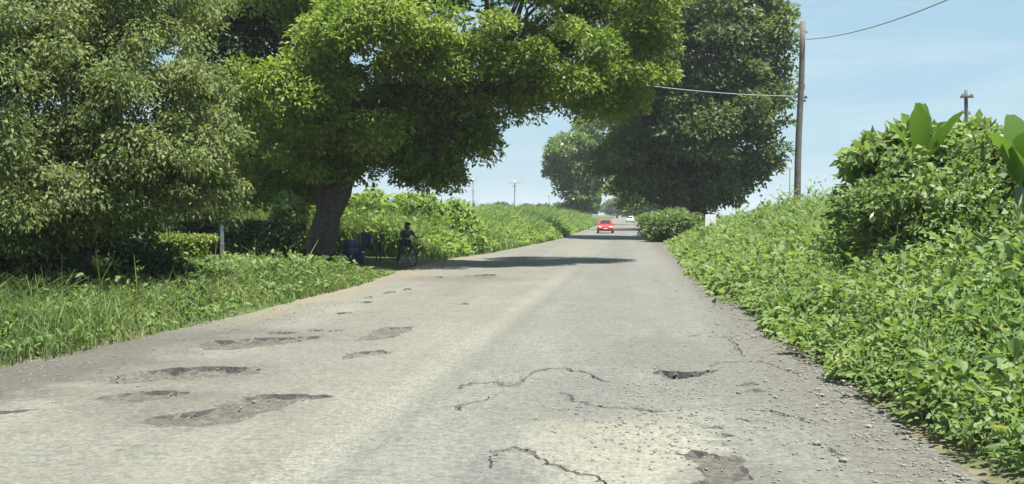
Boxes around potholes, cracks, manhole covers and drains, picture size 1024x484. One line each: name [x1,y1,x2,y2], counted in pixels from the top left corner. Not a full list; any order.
pothole [356,326,413,341]
pothole [138,394,335,428]
crack [709,336,797,374]
crack [452,367,664,413]
pothole [95,390,190,403]
pothole [342,349,393,359]
pothole [107,366,261,384]
pothole [653,370,719,380]
crack [488,446,607,484]
pothole [197,336,325,350]
pothole [673,450,754,484]
